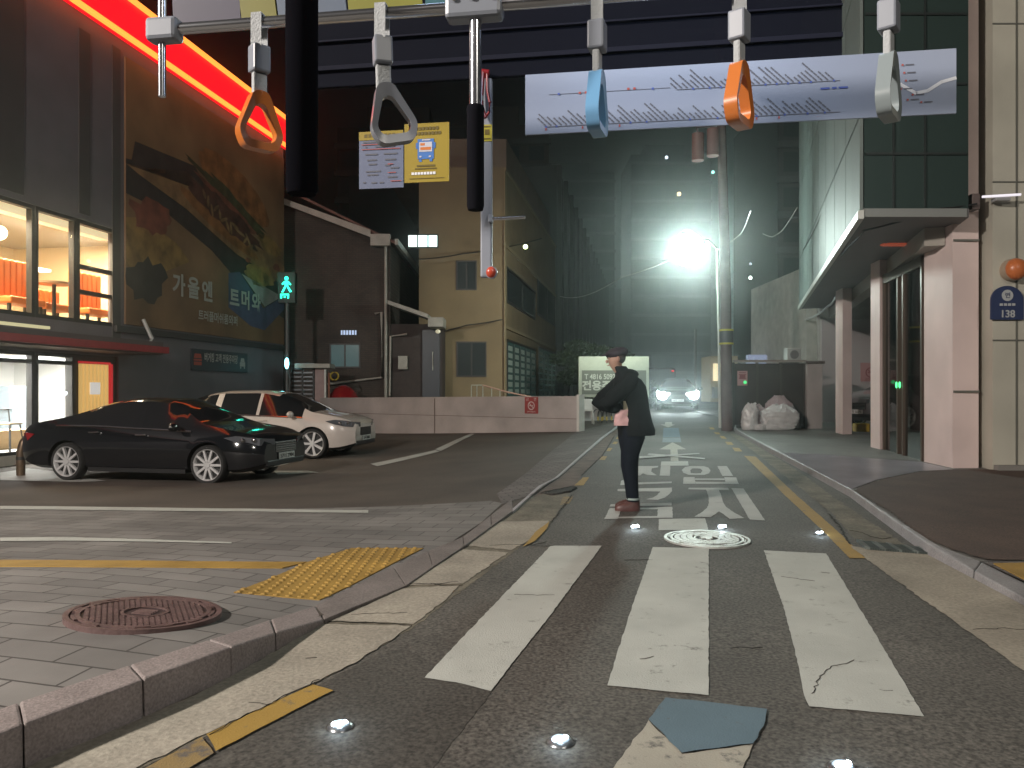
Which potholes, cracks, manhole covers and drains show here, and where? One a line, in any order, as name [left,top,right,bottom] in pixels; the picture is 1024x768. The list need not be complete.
manhole cover [62,596,222,635]
manhole cover [664,530,751,549]
